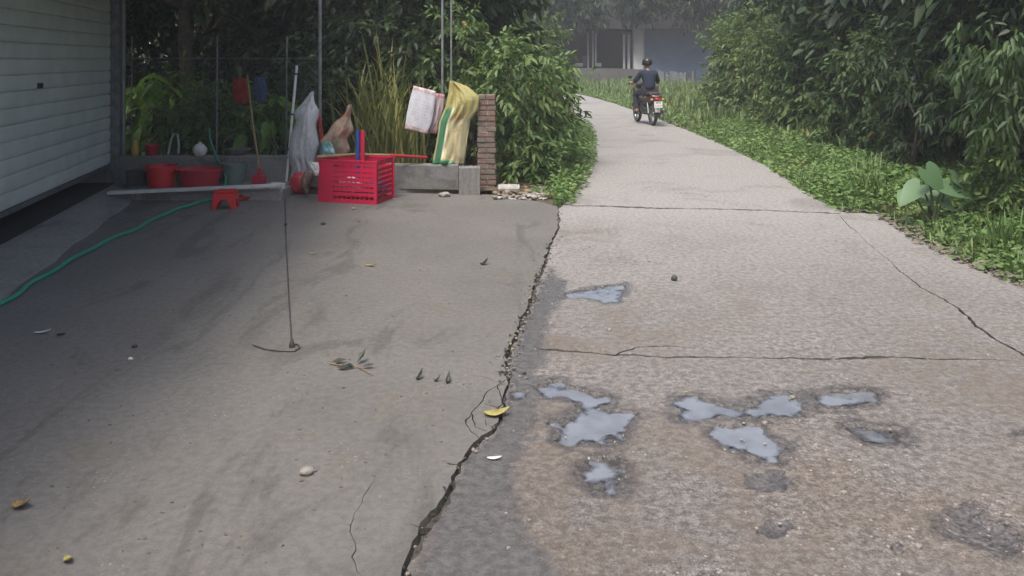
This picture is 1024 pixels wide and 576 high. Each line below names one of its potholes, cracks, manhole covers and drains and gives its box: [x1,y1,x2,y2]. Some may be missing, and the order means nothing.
crack [349,478,375,576]
pothole [533,379,640,446]
crack [401,211,561,576]
crack [840,216,1024,356]
pothole [841,420,915,446]
pothole [574,454,629,495]
pothole [707,422,789,463]
pothole [670,392,808,423]
pothole [742,470,795,493]
pothole [564,283,626,303]
pothole [940,504,1020,556]
pothole [754,520,794,539]
